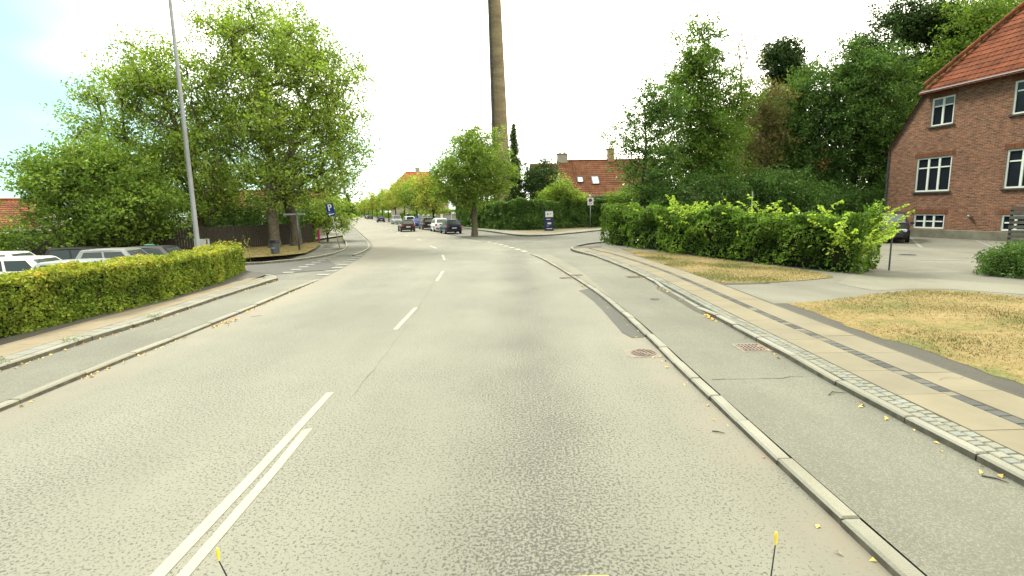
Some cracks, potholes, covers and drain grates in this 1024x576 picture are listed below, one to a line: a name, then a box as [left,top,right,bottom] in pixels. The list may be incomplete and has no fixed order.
drain grate [732,343,772,352]
